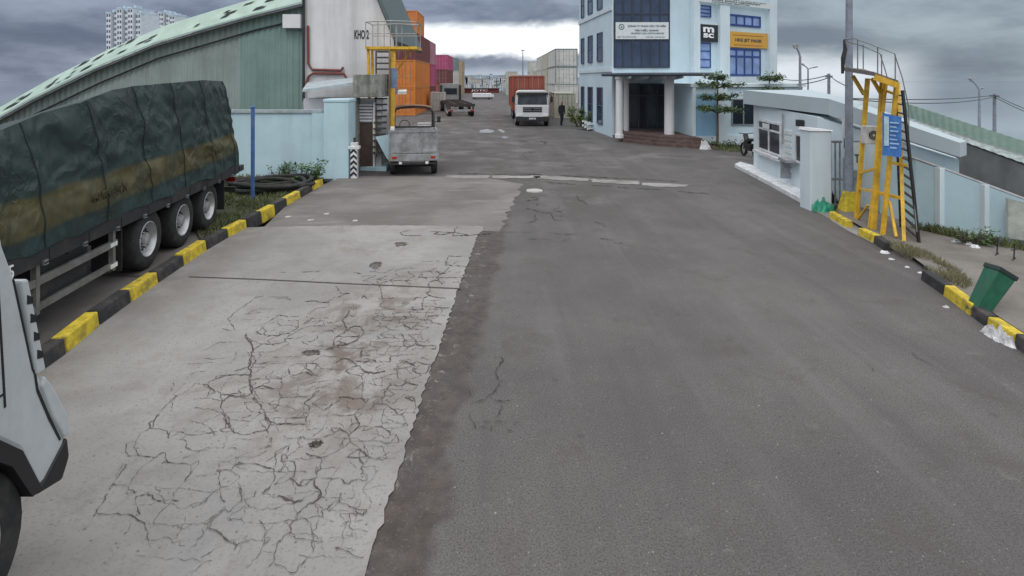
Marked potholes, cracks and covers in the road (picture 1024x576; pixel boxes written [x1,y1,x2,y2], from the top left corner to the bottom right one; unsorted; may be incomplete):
crack [468,356,515,431]
crack [400,164,695,241]
crack [93,256,458,576]
